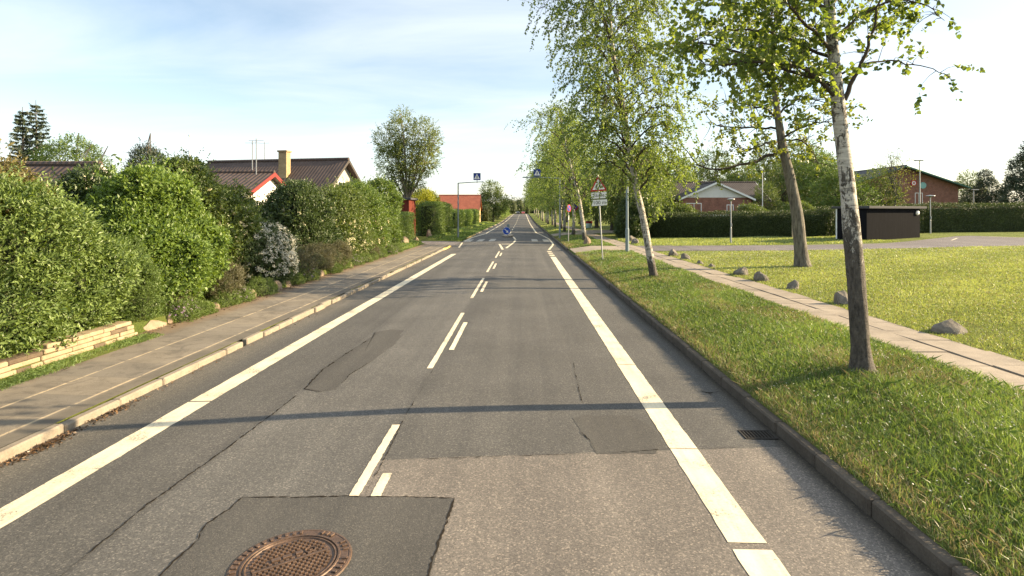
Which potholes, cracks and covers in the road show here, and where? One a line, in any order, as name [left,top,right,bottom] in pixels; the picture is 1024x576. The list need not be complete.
crack [62,341,368,575]
manhole cover [226,529,352,576]
drain grate [737,430,778,439]
